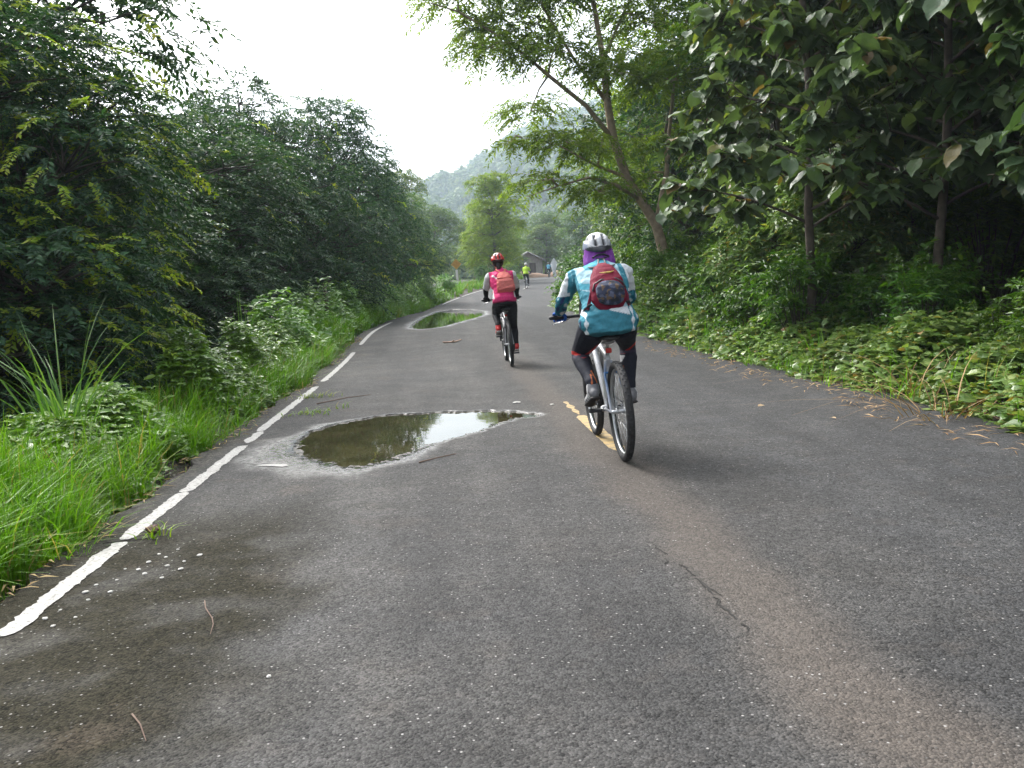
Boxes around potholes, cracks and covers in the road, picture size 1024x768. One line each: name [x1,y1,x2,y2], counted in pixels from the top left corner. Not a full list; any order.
pothole [293,410,540,467]
crack [653,544,749,630]
